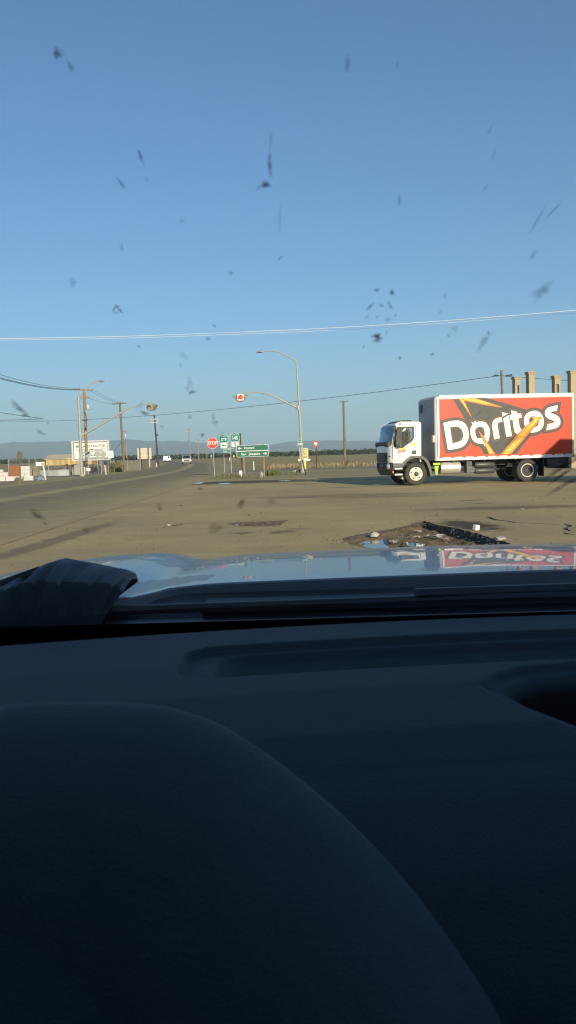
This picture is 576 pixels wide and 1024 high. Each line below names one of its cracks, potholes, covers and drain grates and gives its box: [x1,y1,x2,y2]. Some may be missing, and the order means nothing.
pothole [342,521,510,548]
